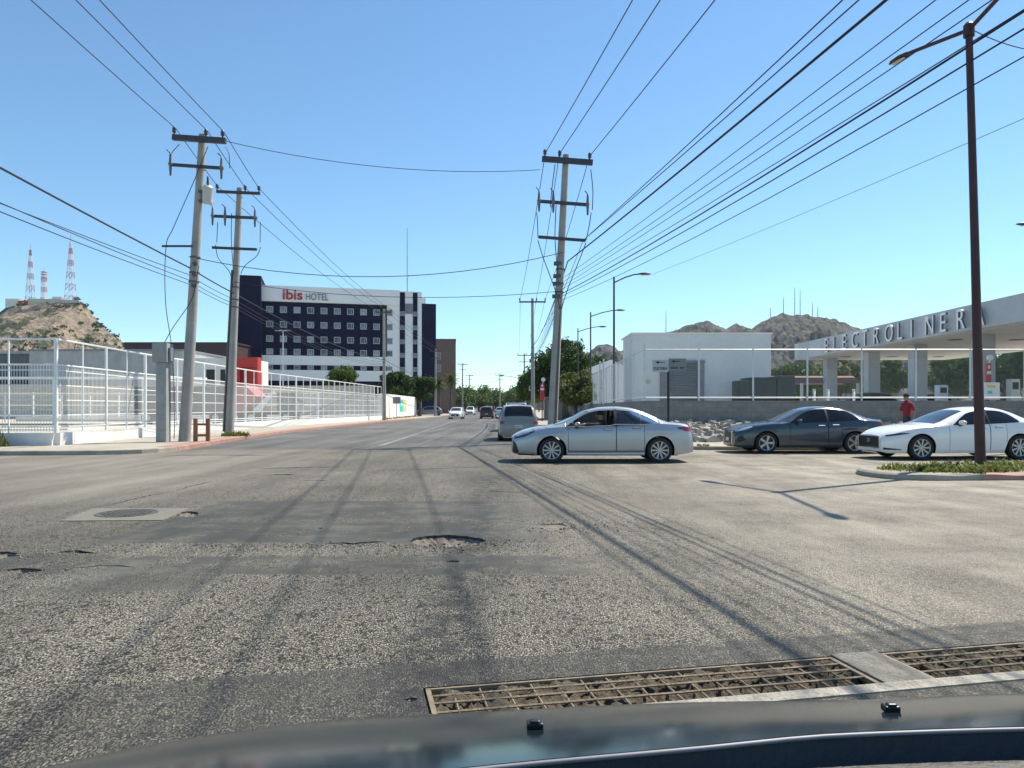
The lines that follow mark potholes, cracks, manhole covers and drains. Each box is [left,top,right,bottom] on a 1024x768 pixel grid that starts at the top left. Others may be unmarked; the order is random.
drain grate [880,642,1024,678]
pothole [410,535,486,547]
manhole cover [61,508,190,521]
